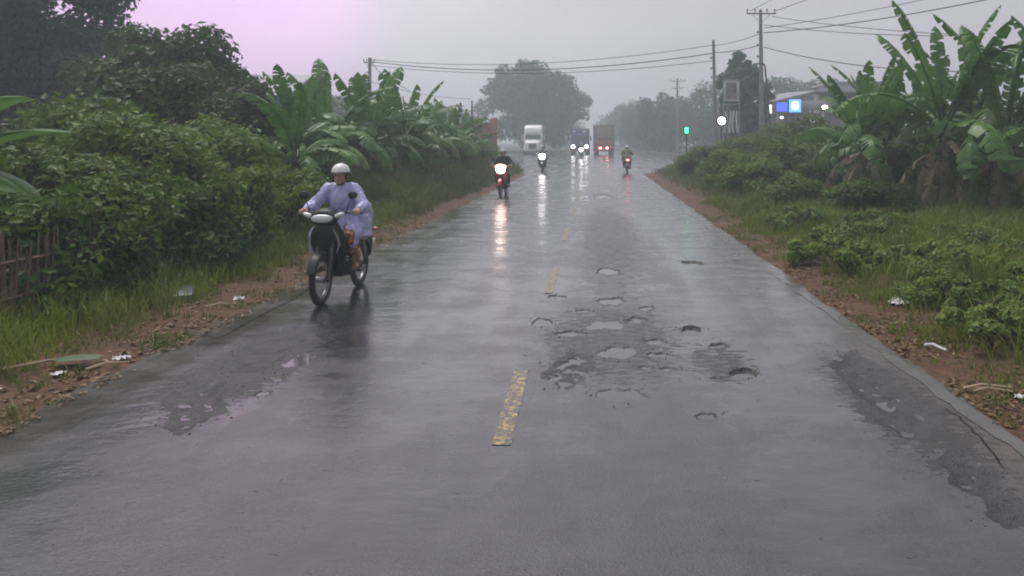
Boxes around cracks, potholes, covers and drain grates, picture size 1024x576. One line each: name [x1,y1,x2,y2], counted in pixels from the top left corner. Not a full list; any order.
pothole [695,412,719,420]
pothole [679,325,702,333]
pothole [540,352,597,391]
pothole [595,388,649,403]
pothole [584,320,625,330]
pothole [729,368,760,377]
pothole [531,317,553,326]
crack [939,405,1005,470]
pothole [595,267,620,275]
pothole [594,297,628,305]
pothole [595,346,639,359]
